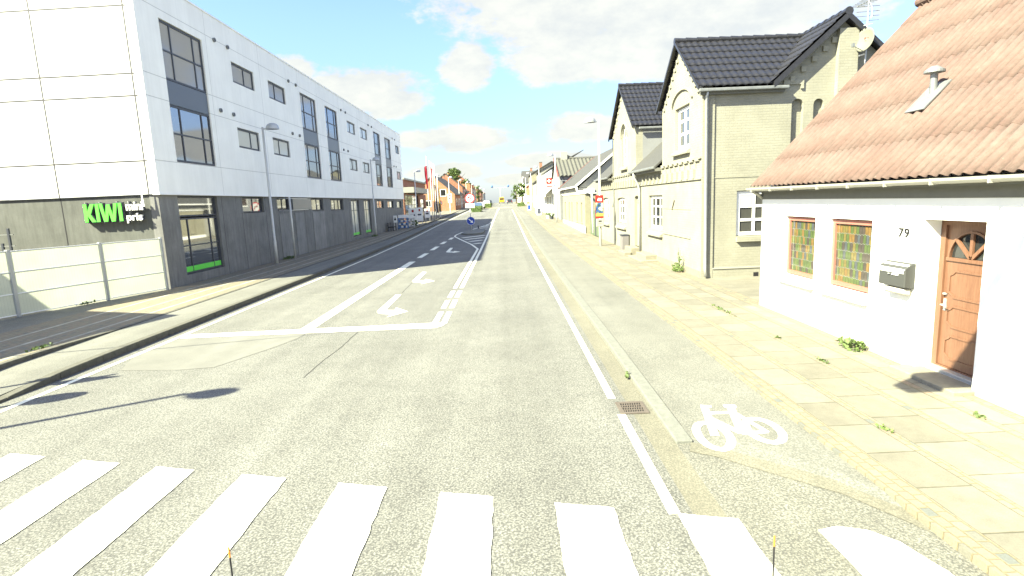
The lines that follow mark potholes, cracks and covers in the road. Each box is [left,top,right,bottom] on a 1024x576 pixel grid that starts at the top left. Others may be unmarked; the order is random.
drain grate [615,401,650,414]
